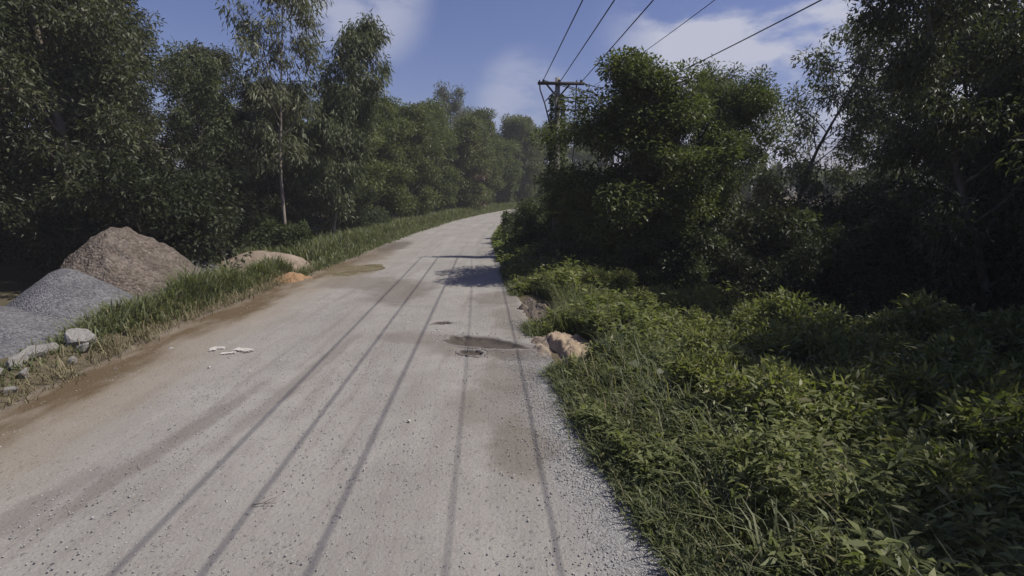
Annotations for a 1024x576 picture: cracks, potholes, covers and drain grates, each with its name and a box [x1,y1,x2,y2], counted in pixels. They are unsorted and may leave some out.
pothole [435,334,535,351]
